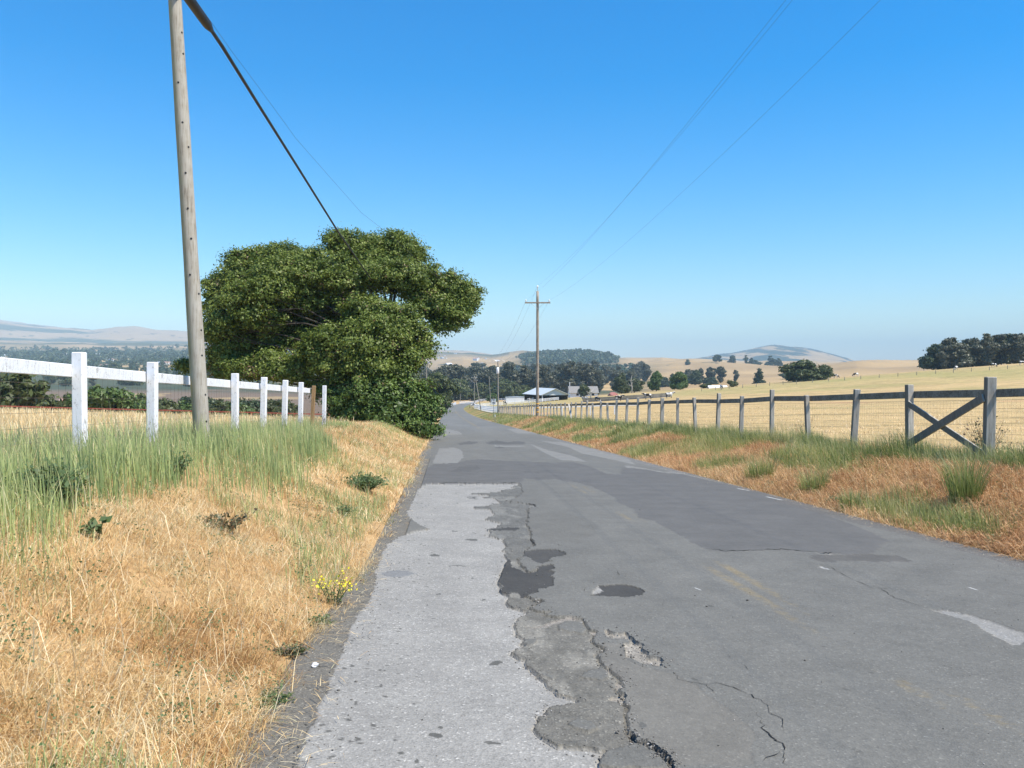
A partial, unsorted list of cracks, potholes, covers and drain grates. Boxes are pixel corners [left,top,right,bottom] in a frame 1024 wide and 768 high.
crack [627,730,675,768]
crack [685,667,786,762]
pothole [604,629,664,666]
